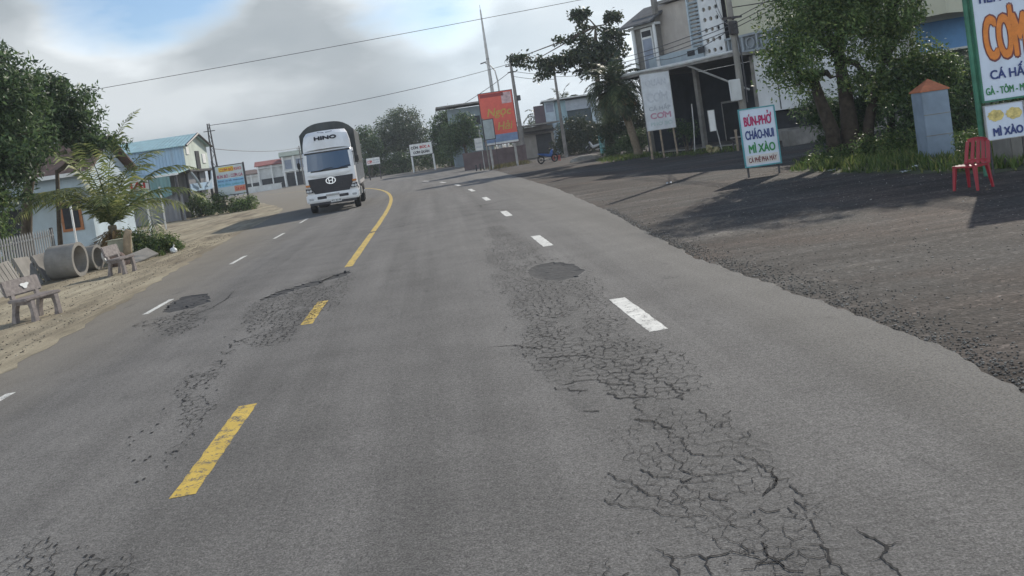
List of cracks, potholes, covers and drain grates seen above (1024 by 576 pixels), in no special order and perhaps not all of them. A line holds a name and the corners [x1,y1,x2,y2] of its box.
crack [484,226,902,576]
crack [3,536,150,576]
pothole [527,262,585,281]
pothole [163,294,211,313]
crack [127,270,355,482]
